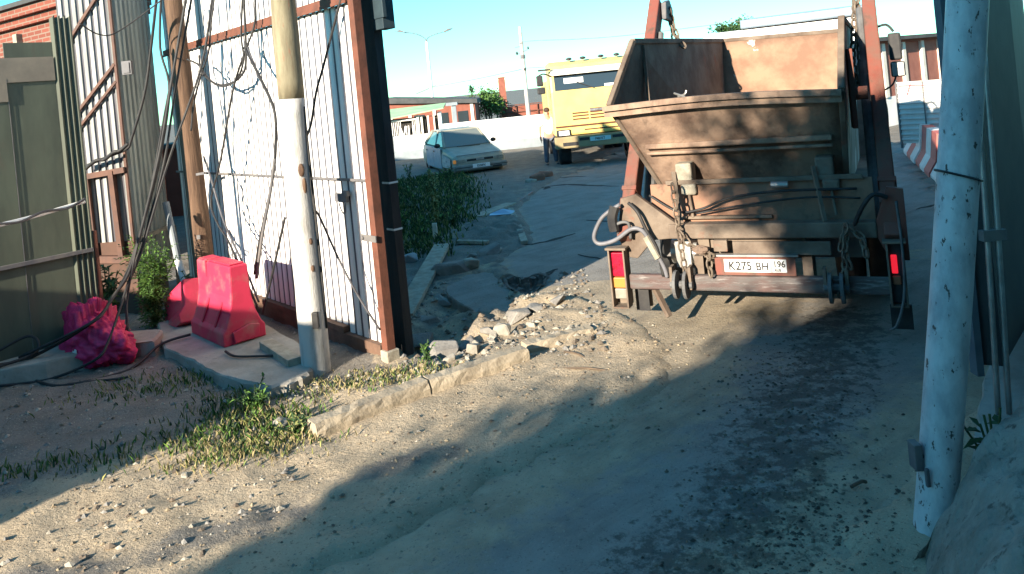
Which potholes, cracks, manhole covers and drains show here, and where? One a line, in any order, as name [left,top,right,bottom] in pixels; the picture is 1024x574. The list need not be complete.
crack [542,176,605,189]
crack [527,220,607,259]
pothole [503,272,549,295]
